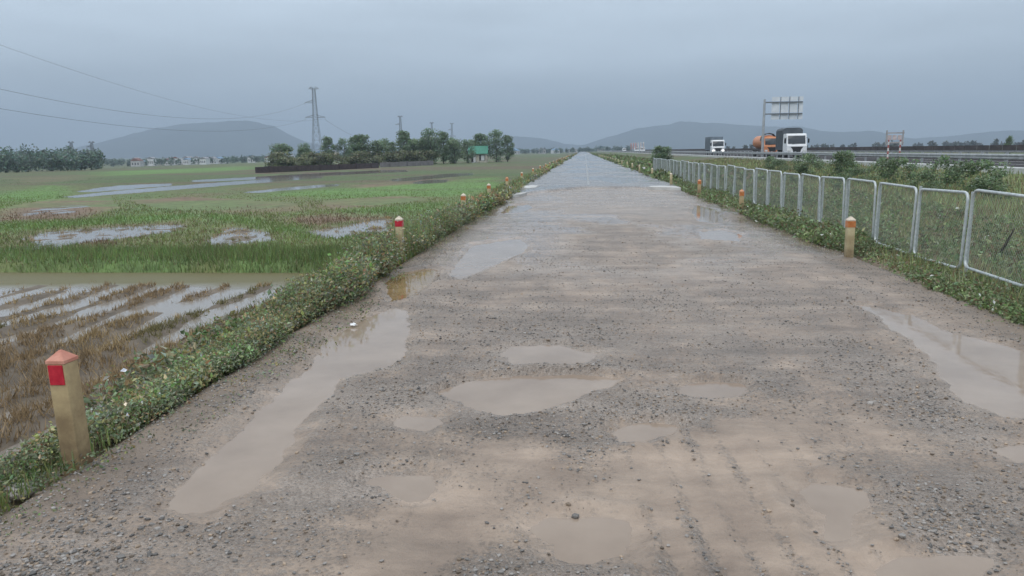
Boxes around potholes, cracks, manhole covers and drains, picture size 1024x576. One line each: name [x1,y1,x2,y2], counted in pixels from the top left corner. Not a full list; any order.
pothole [484,338,613,366]
pothole [365,406,468,436]
pothole [585,408,705,447]
pothole [413,363,646,423]
pothole [655,370,773,402]
pothole [502,495,672,576]
